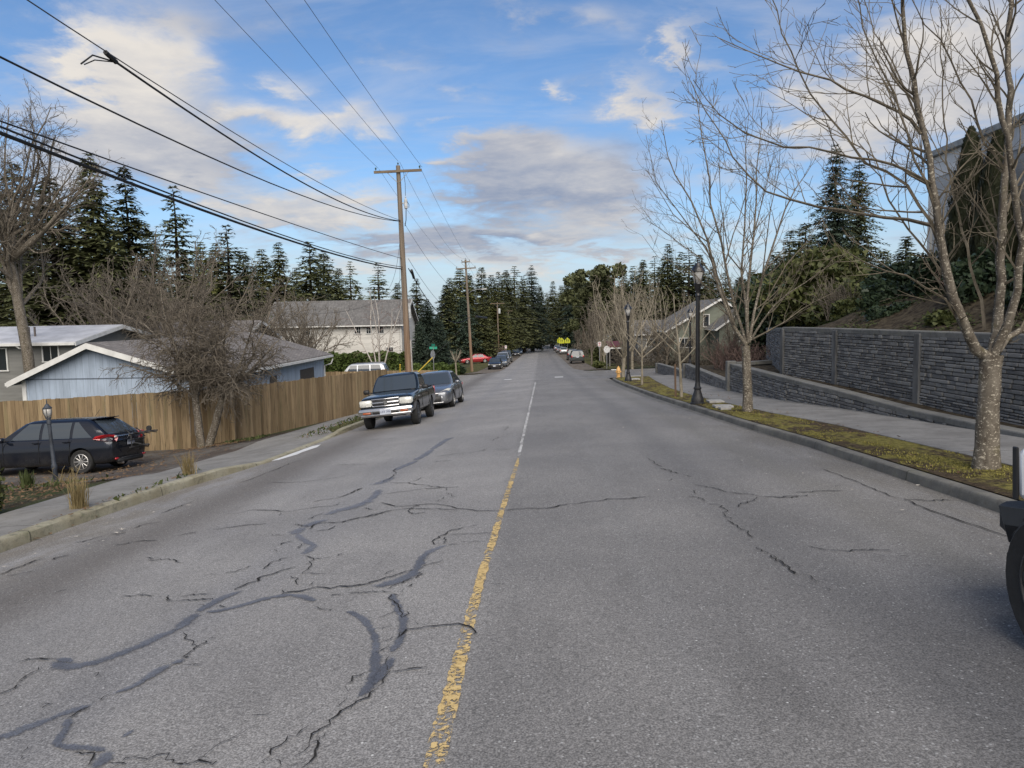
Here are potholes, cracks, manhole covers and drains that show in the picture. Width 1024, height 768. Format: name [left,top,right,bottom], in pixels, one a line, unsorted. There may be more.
crack [651,460,842,589]
crack [0,632,259,768]
crack [118,427,650,768]
